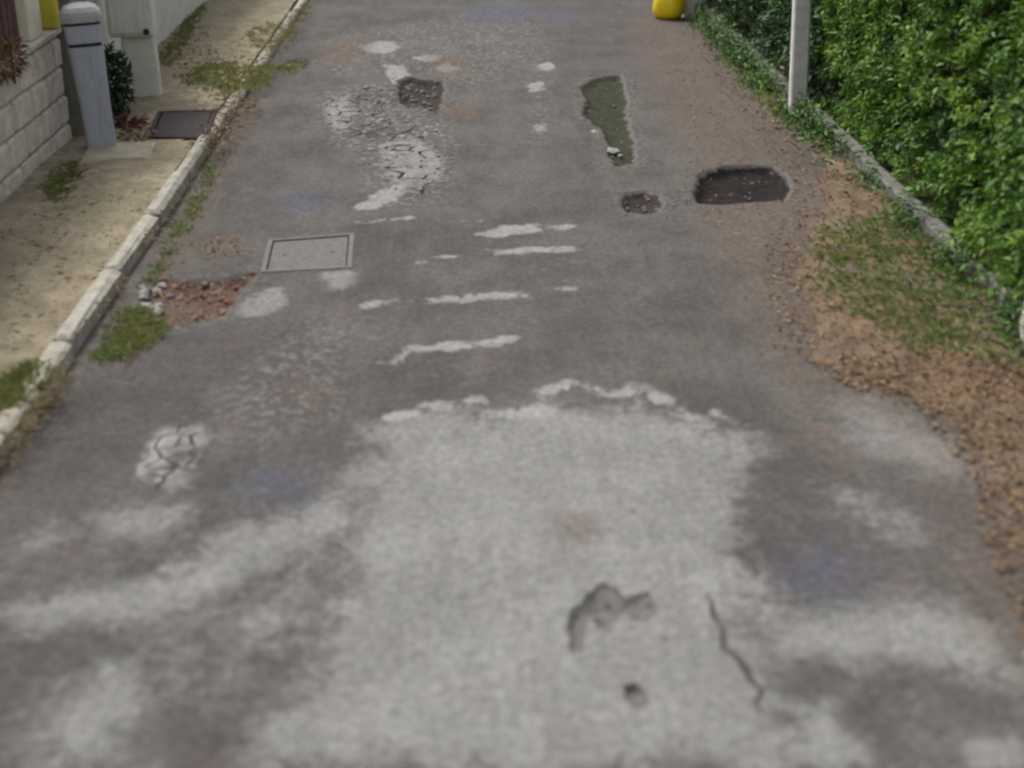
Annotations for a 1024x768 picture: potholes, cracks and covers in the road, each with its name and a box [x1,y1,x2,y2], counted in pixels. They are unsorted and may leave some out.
pothole [554,70,663,168]
crack [325,86,442,195]
manhole cover [260,233,354,273]
pothole [622,682,649,710]
crack [144,421,200,490]
pothole [674,156,813,210]
manhole cover [148,109,217,154]
crack [703,594,766,714]
pothole [132,268,259,330]
pothole [565,582,657,653]
